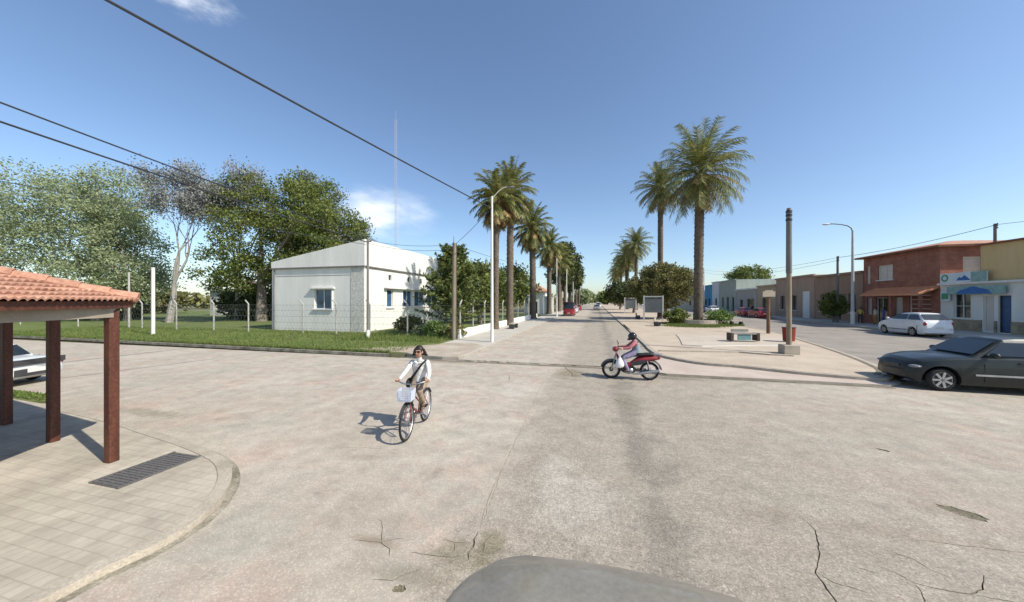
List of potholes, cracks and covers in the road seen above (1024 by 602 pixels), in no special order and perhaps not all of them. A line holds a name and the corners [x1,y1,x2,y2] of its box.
crack [359,519,401,554]
drain grate [88,451,201,489]
crack [804,520,1013,602]
